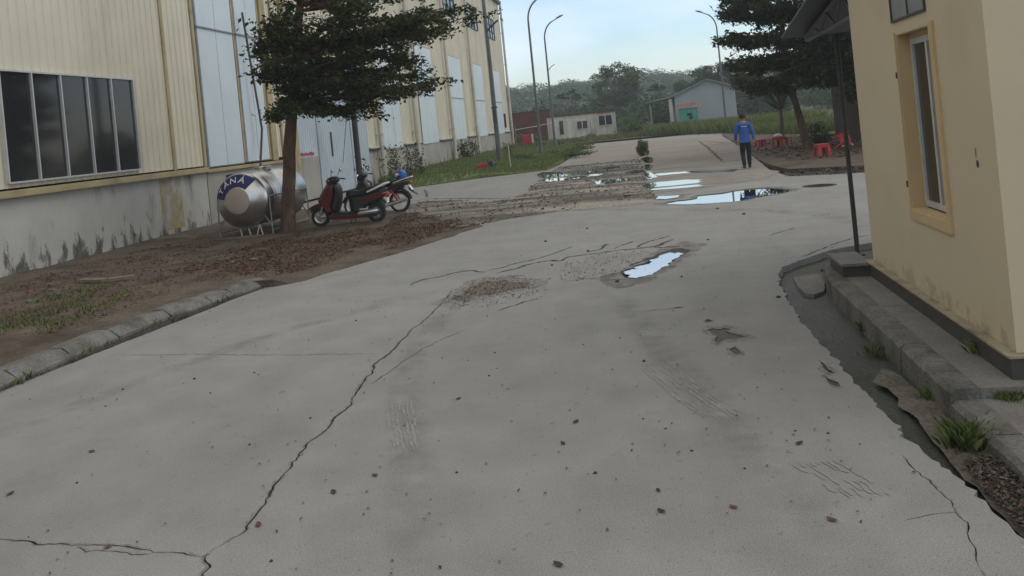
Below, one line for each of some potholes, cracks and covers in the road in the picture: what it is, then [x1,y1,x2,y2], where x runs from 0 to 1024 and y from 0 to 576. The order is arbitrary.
pothole [620,248,690,279]
crack [0,237,671,576]
pothole [708,327,746,343]
